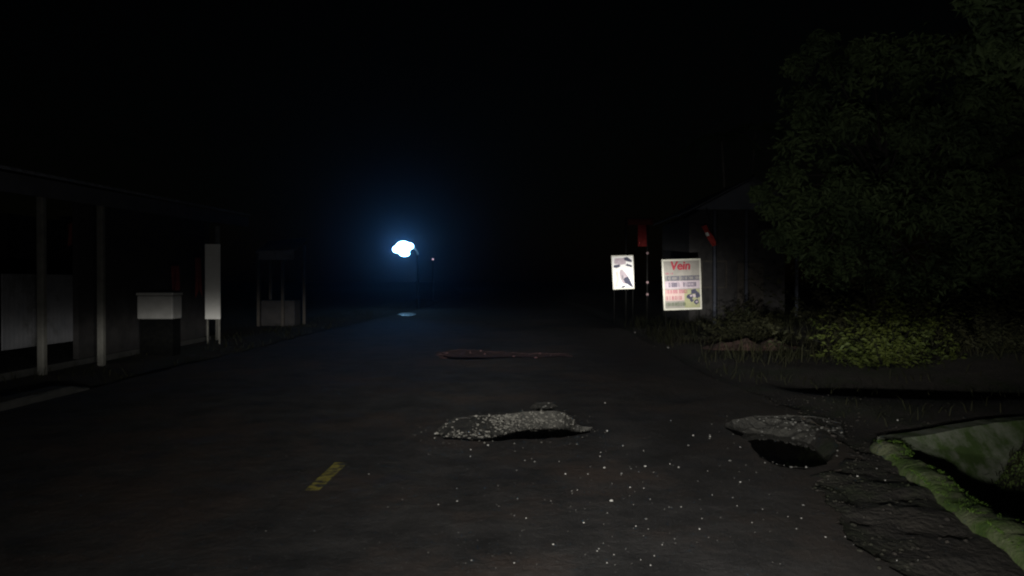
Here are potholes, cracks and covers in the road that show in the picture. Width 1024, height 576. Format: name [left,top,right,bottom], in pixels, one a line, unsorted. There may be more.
pothole [530,402,558,412]
pothole [419,407,606,445]
pothole [708,413,845,476]
